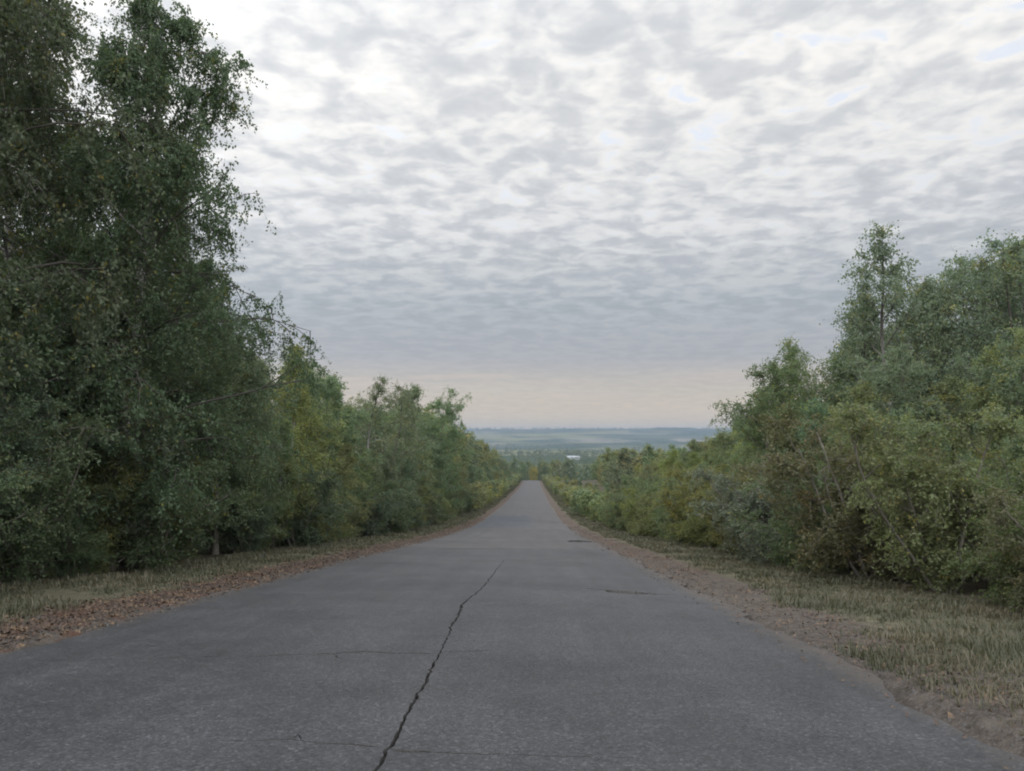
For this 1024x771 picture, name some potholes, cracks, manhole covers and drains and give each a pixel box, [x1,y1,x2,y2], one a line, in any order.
crack [54,548,633,771]
